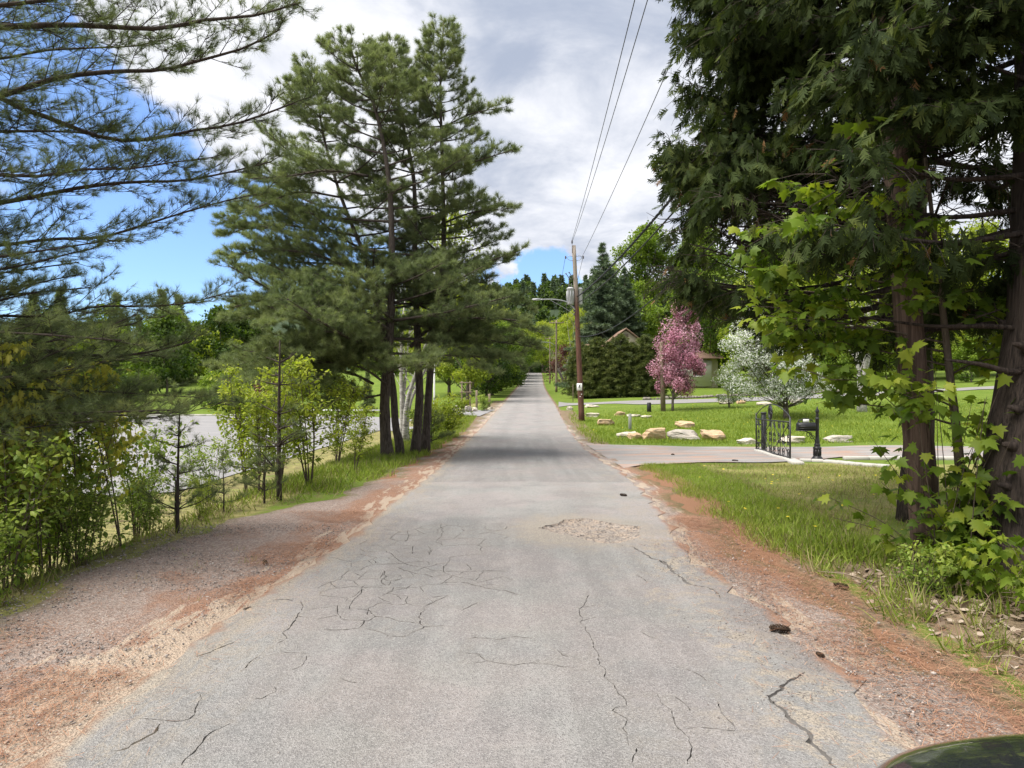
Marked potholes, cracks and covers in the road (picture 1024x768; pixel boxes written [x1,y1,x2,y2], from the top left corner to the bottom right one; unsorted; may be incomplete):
pothole [540,518,641,544]
crack [634,547,720,597]
crack [117,694,229,765]
crack [301,525,518,637]
crack [579,595,629,745]
crack [658,696,735,764]
